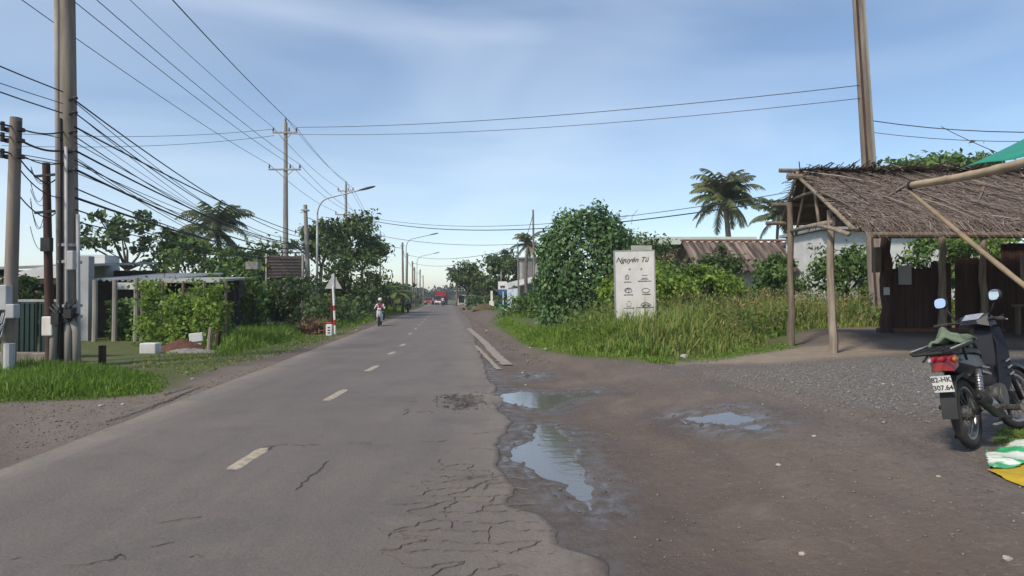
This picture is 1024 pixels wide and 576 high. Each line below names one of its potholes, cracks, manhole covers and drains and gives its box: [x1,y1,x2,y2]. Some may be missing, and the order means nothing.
pothole [431,391,503,413]
crack [378,432,558,576]
pothole [499,423,614,521]
crack [264,444,328,490]
pothole [493,388,613,412]
pothole [671,405,782,433]
